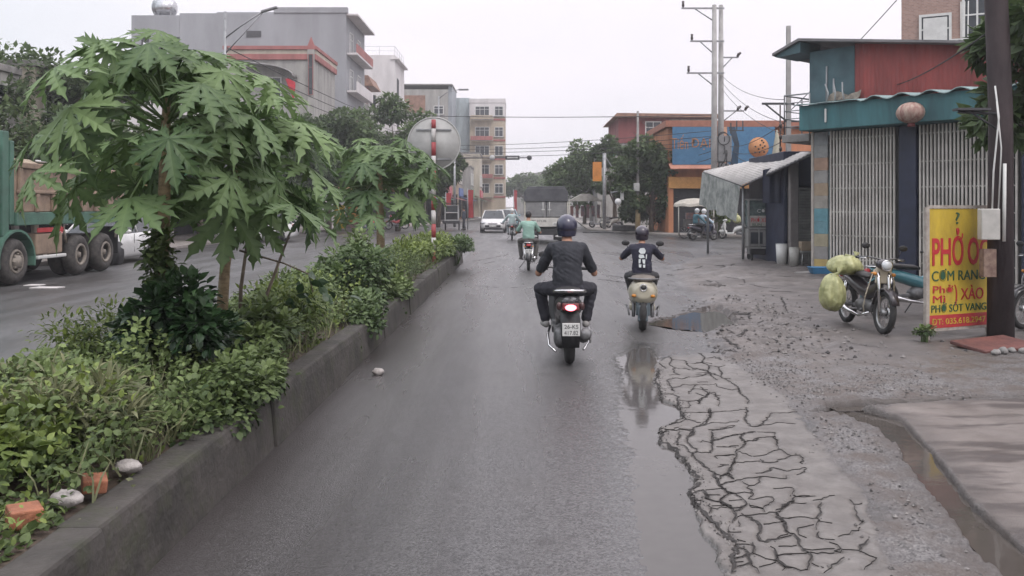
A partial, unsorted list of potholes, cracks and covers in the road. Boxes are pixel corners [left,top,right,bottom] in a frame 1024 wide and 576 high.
crack [654,264,877,573]
pothole [647,305,745,334]
